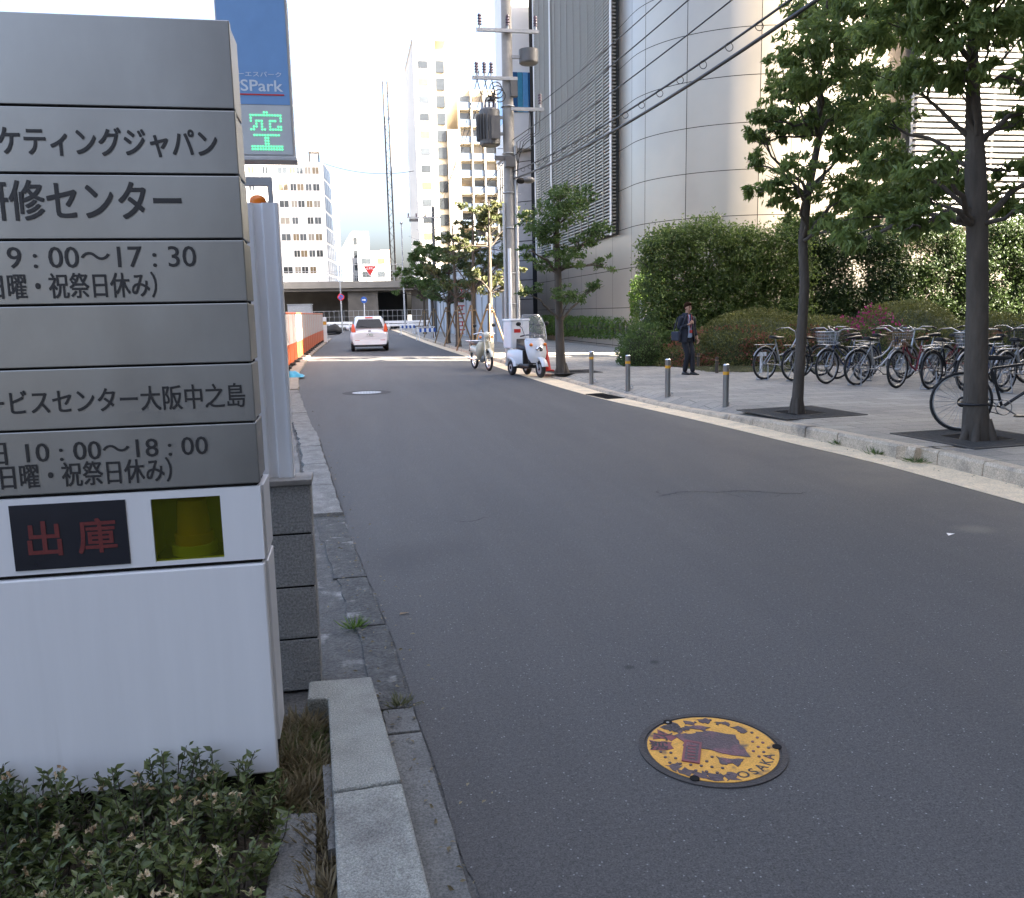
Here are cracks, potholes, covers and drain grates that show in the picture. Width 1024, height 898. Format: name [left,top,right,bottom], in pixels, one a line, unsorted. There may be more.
manhole cover [638,714,789,789]
